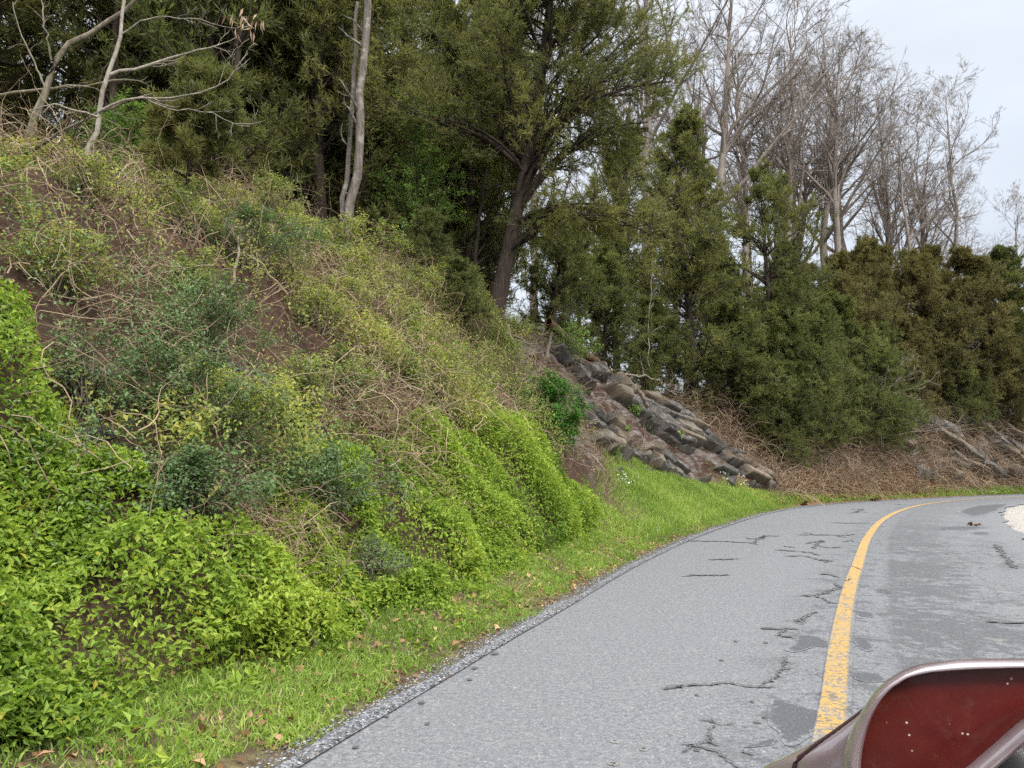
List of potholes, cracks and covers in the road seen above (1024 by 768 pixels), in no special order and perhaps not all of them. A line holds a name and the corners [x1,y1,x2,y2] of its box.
crack [662,656,791,689]
crack [682,717,753,768]
crack [683,509,864,638]
crack [993,544,1019,568]
